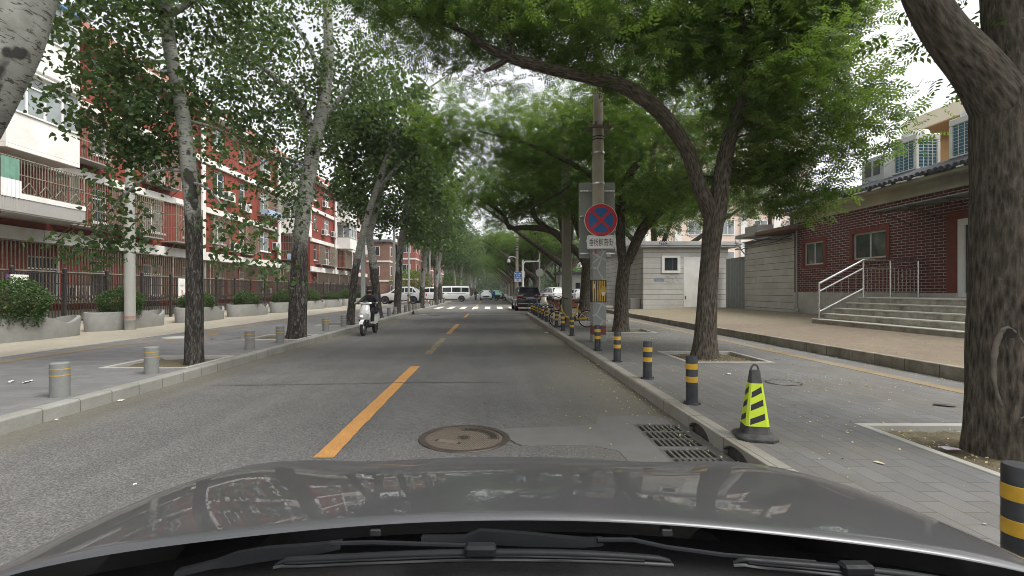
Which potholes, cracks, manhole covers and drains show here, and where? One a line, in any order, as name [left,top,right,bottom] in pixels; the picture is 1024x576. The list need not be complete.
drain grate [659,449,729,461]
drain grate [633,424,709,447]
manhole cover [418,425,509,453]
